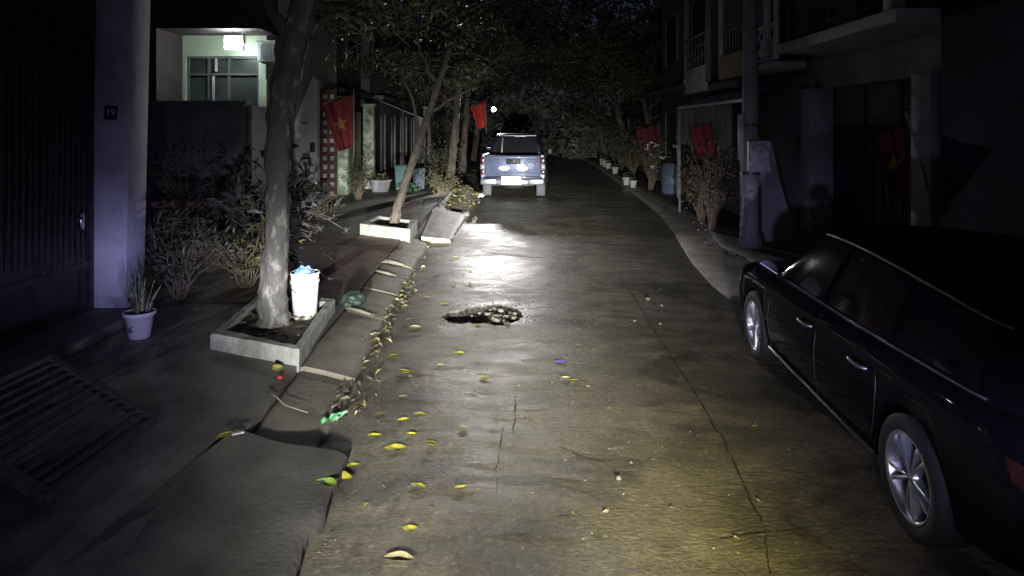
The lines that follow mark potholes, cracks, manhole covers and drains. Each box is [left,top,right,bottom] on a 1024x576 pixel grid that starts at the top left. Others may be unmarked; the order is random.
crack [495,395,517,495]
pothole [441,298,552,335]
crack [619,278,814,575]
